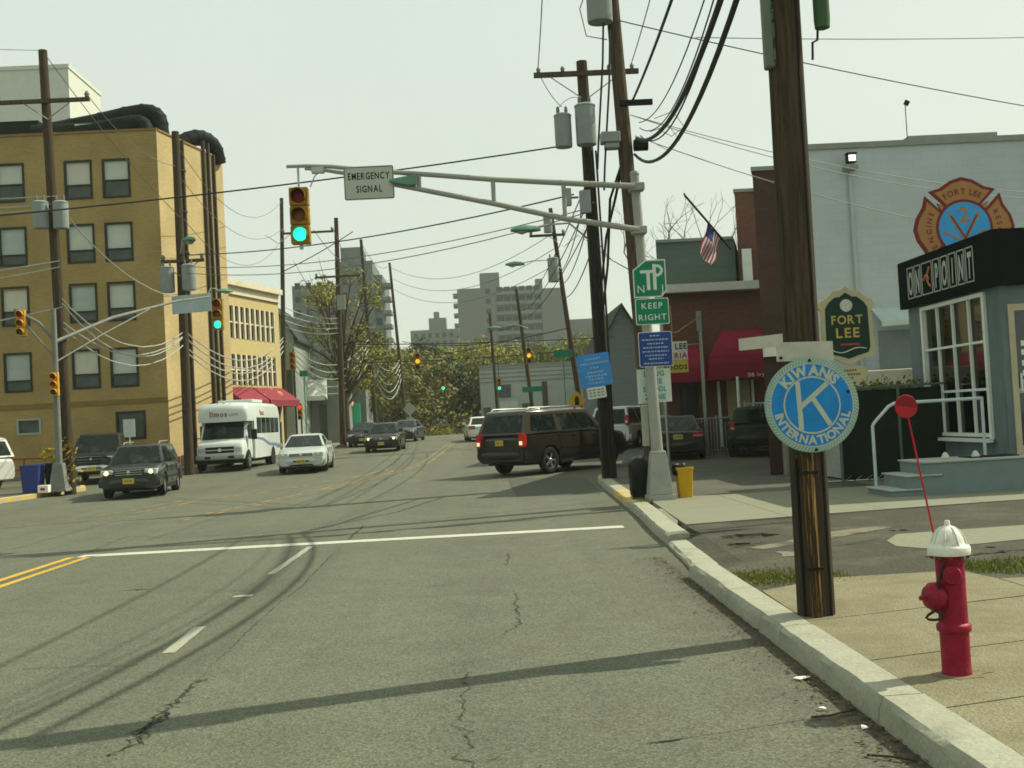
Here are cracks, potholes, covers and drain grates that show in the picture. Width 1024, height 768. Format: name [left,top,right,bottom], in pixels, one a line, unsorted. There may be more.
crack [431,554,522,638]
crack [108,679,207,756]
crack [451,668,499,768]
